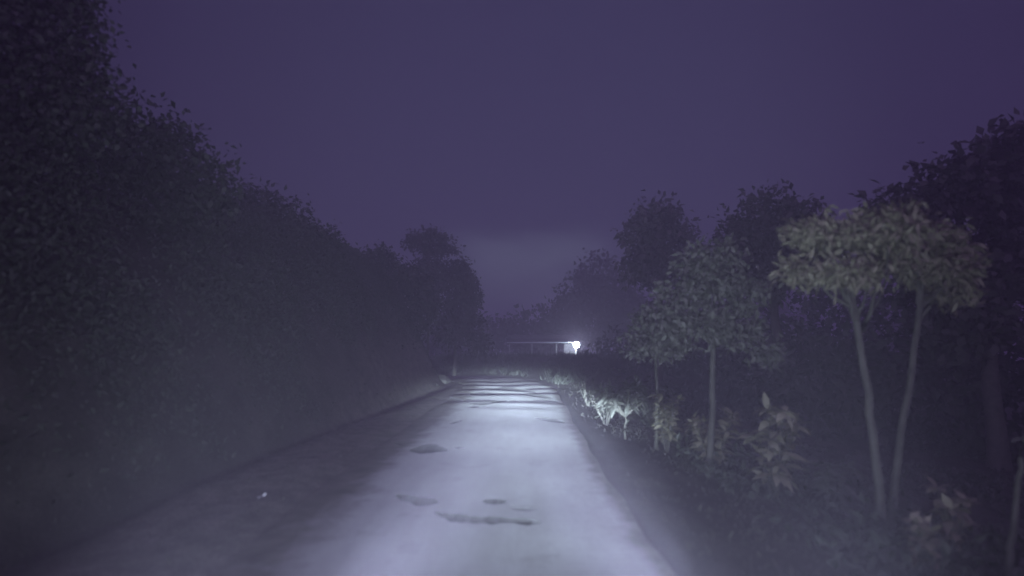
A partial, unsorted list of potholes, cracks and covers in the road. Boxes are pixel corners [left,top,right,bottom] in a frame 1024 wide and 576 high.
pothole [435,511,541,525]
pothole [395,494,439,506]
pothole [409,444,448,454]
